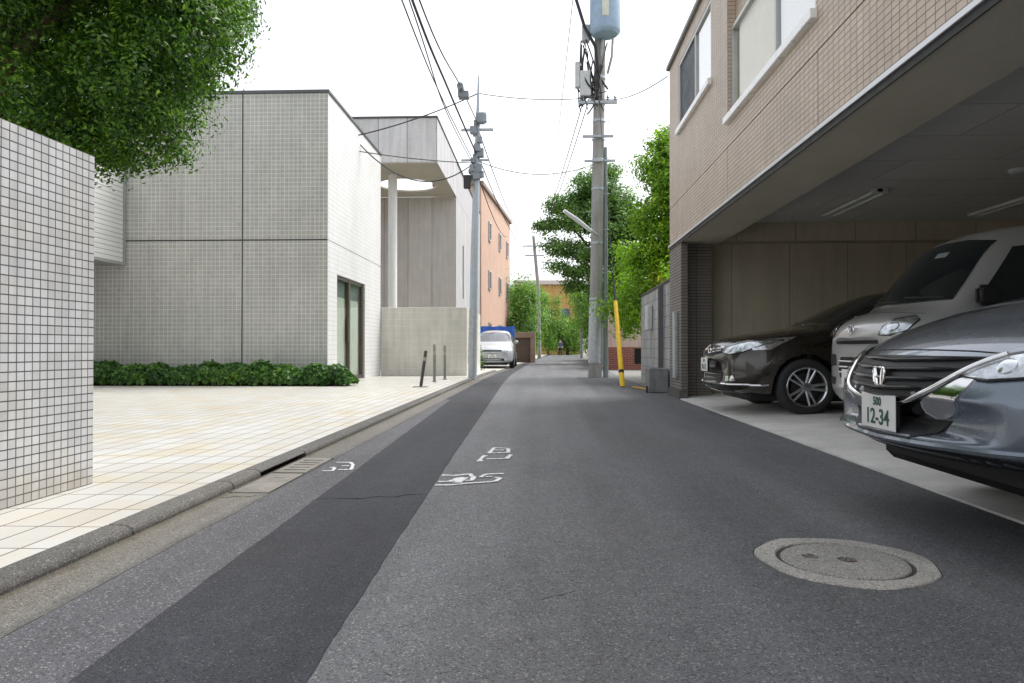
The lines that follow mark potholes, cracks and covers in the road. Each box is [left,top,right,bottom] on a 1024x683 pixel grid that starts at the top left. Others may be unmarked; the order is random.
drain grate [260,456,298,476]
manhole cover [754,538,942,590]
